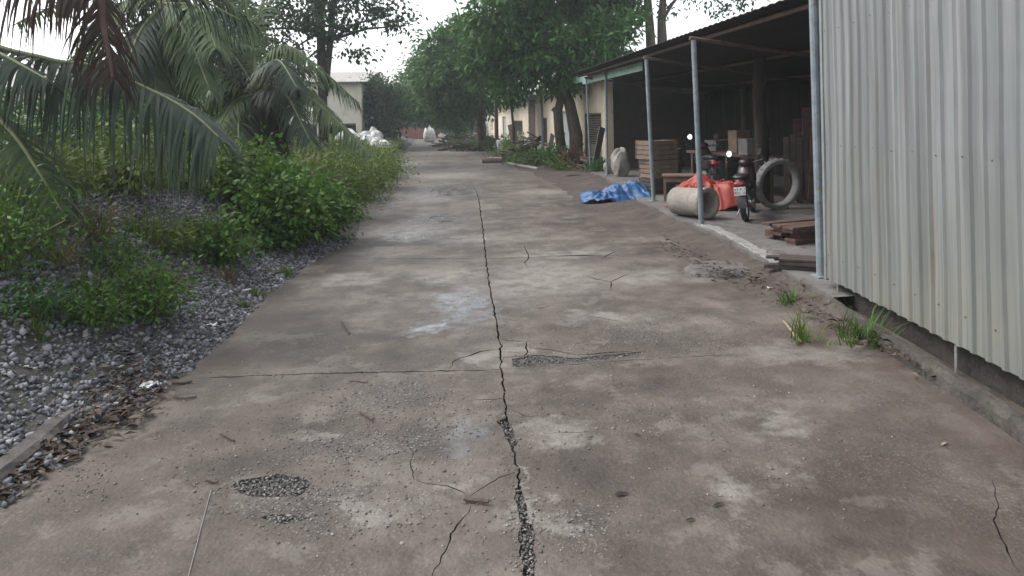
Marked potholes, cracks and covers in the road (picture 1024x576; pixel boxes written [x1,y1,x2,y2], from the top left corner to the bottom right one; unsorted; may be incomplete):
pothole [232,474,312,498]
crack [992,481,1021,573]
pothole [512,352,643,367]
pothole [261,514,299,524]
crack [409,182,629,576]
